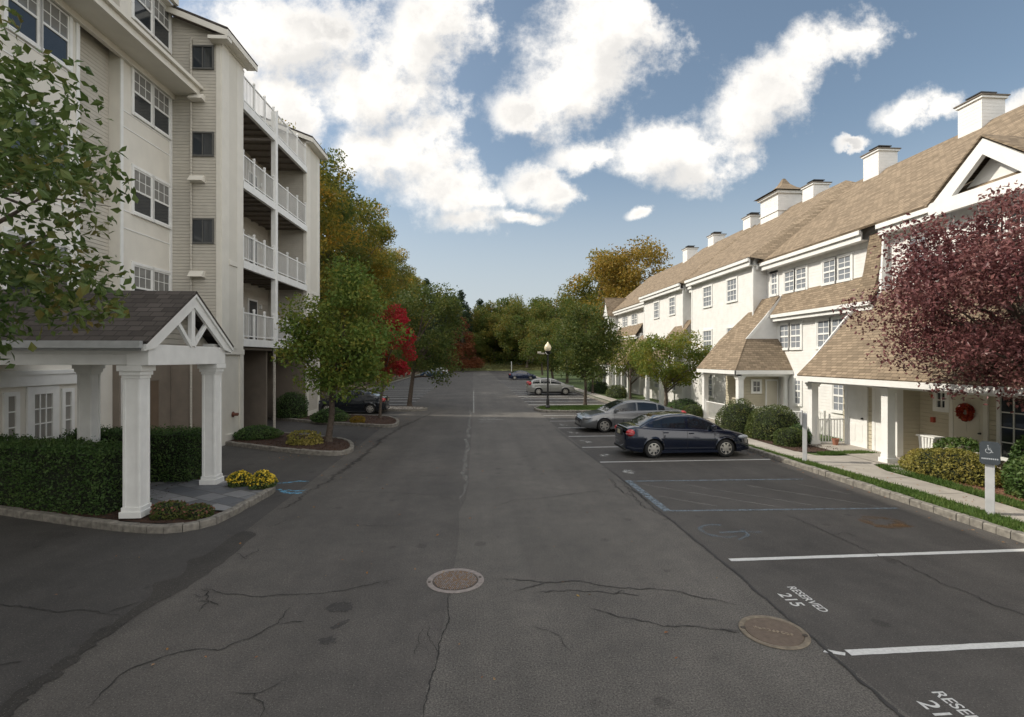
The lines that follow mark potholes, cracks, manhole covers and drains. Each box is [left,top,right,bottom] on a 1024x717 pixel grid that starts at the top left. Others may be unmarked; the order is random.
crack [85,577,400,709]
manhole cover [738,615,811,650]
crack [485,577,739,632]
crack [2,602,138,617]
manhole cover [426,568,484,593]
crack [229,680,283,717]
